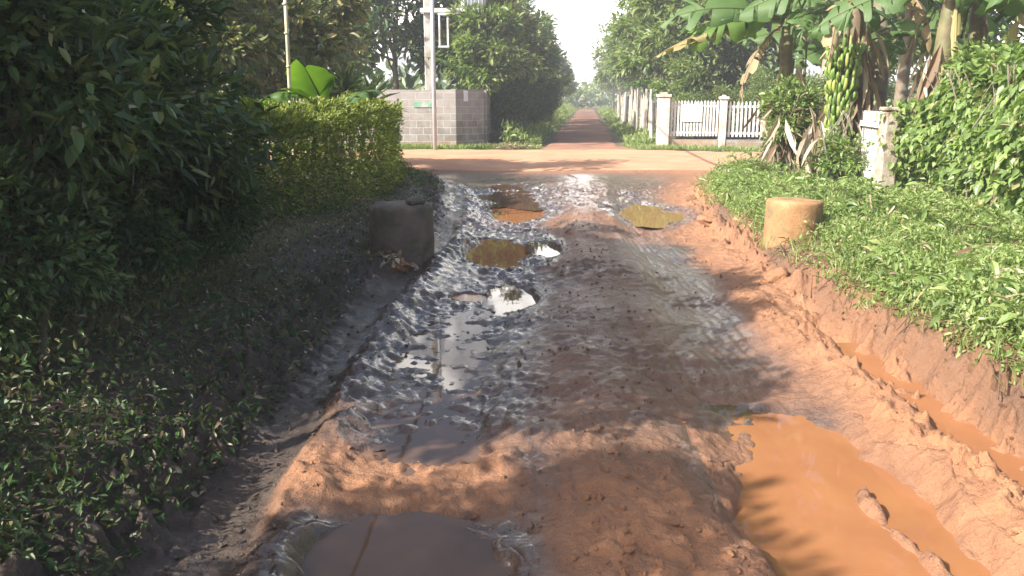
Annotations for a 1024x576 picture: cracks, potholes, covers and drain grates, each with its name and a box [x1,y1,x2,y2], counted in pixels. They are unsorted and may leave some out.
pothole [477,282,544,312]
pothole [261,512,529,576]
pothole [459,234,536,270]
pothole [524,239,566,258]
pothole [692,412,1024,576]
pothole [449,292,488,302]
pothole [480,203,549,224]
pothole [598,201,695,230]
